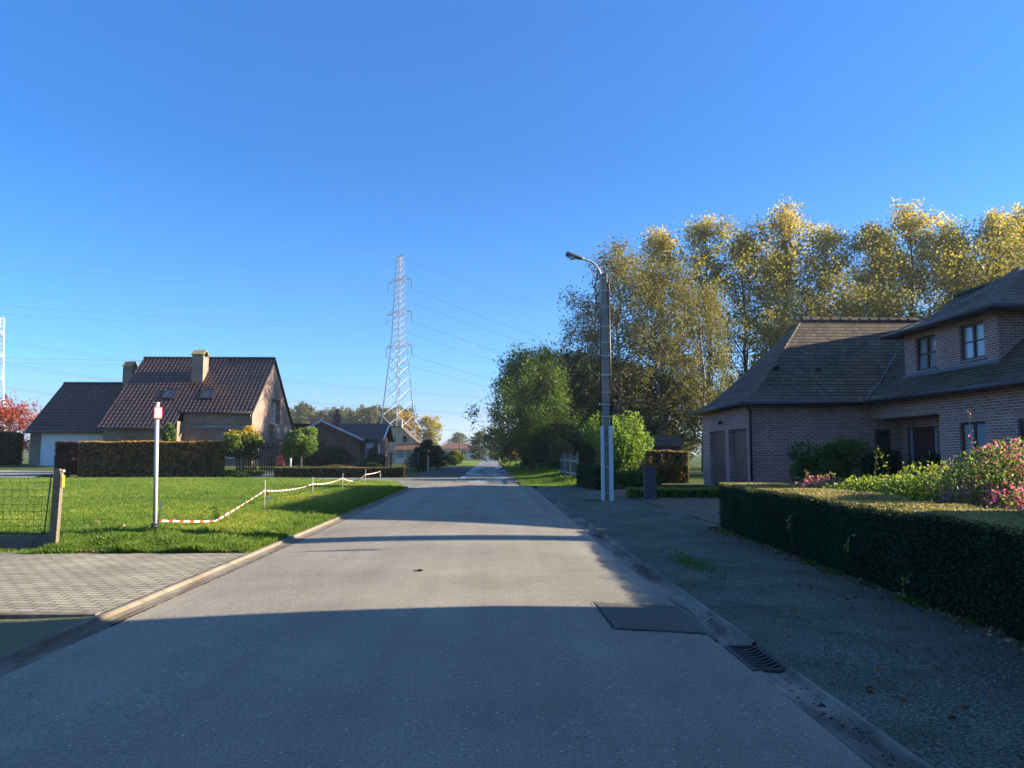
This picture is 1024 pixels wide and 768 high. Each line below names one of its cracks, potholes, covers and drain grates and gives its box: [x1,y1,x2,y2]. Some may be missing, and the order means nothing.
drain grate [724,645,787,673]
